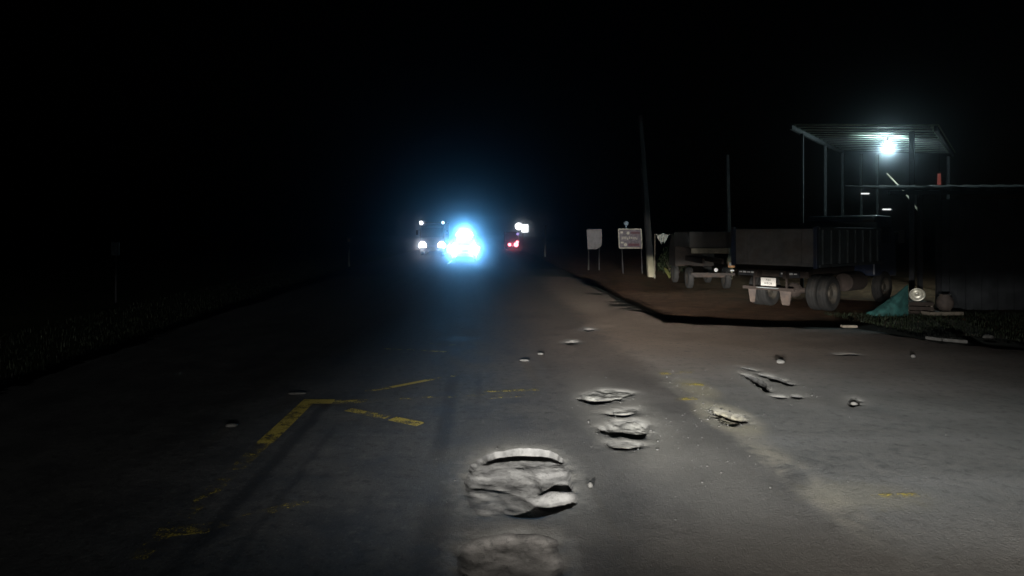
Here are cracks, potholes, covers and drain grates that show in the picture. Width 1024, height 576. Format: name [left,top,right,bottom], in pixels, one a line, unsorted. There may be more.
pothole [456,533,565,576]
pothole [712,411,749,427]
pothole [576,389,635,405]
pothole [606,441,644,451]
pothole [605,408,638,417]
pothole [464,448,578,518]
pothole [598,419,651,440]
